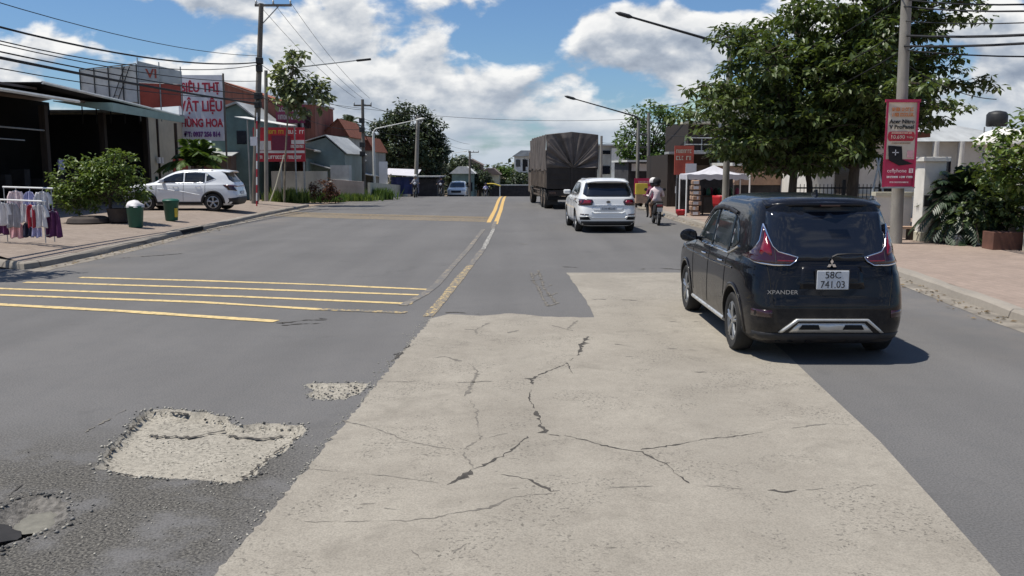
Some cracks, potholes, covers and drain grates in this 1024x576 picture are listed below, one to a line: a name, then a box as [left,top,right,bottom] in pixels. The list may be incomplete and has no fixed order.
pothole [302,381,373,401]
pothole [88,406,314,485]
pothole [0,491,94,556]
crack [304,270,760,522]
